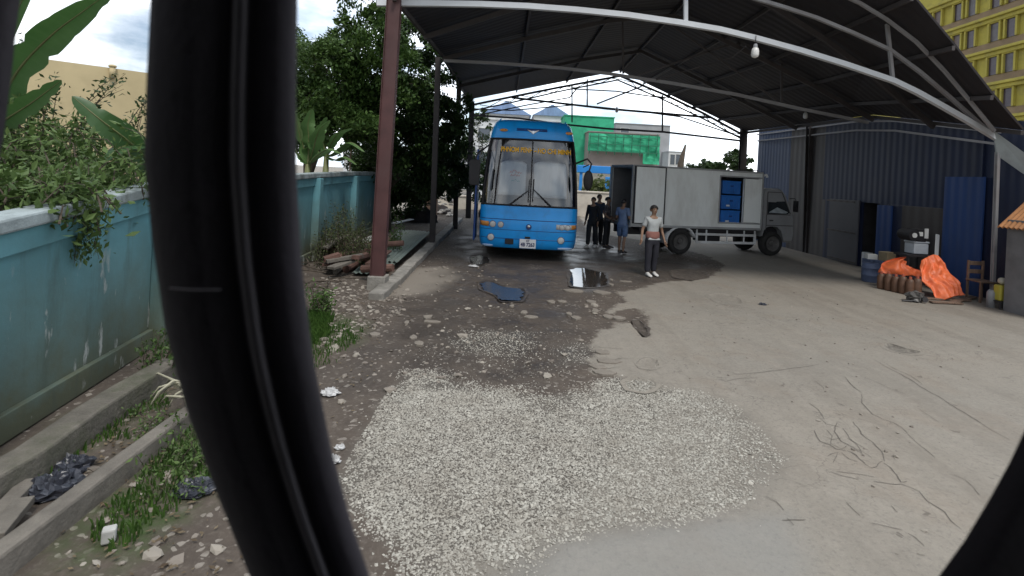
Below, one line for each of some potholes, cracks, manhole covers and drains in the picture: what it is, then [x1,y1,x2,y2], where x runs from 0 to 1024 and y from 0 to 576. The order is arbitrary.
pothole [880,342,926,356]
pothole [631,319,651,337]
pothole [477,280,529,302]
pothole [566,266,611,288]
crack [728,361,1010,528]
